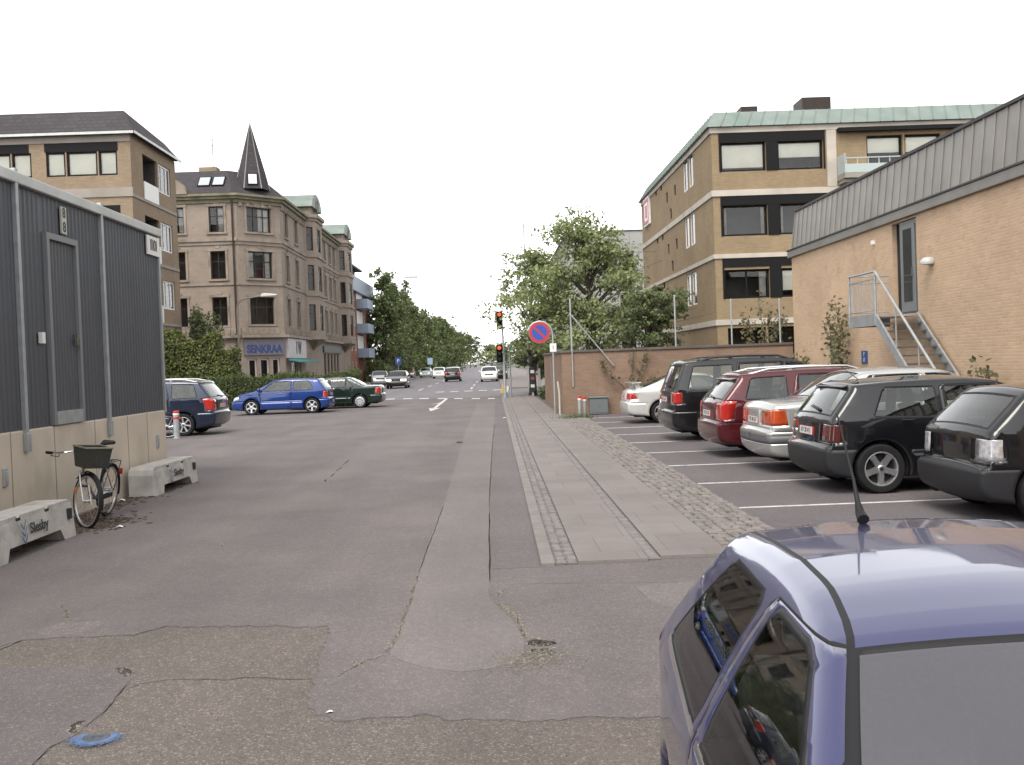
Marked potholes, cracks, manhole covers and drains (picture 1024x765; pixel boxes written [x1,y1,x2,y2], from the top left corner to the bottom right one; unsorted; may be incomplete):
crack [339,654,387,676]
pothole [66,720,86,735]
pothole [115,667,135,677]
